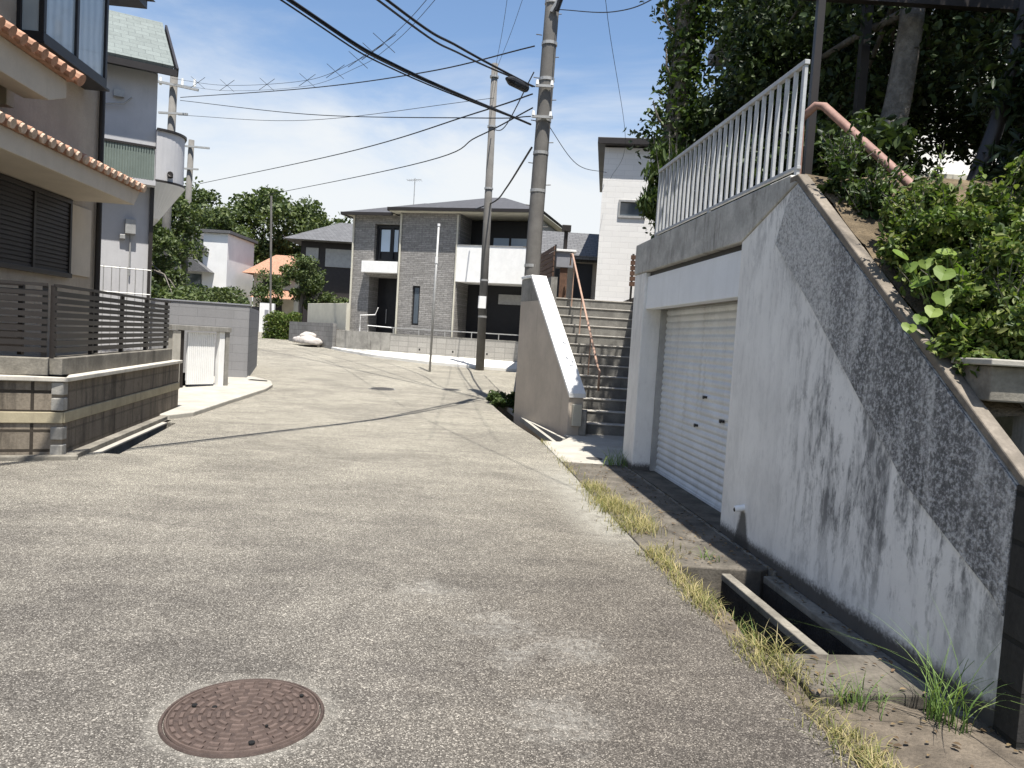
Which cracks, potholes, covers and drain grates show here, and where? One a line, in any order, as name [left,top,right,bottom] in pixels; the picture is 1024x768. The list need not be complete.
manhole cover [157,678,325,758]
